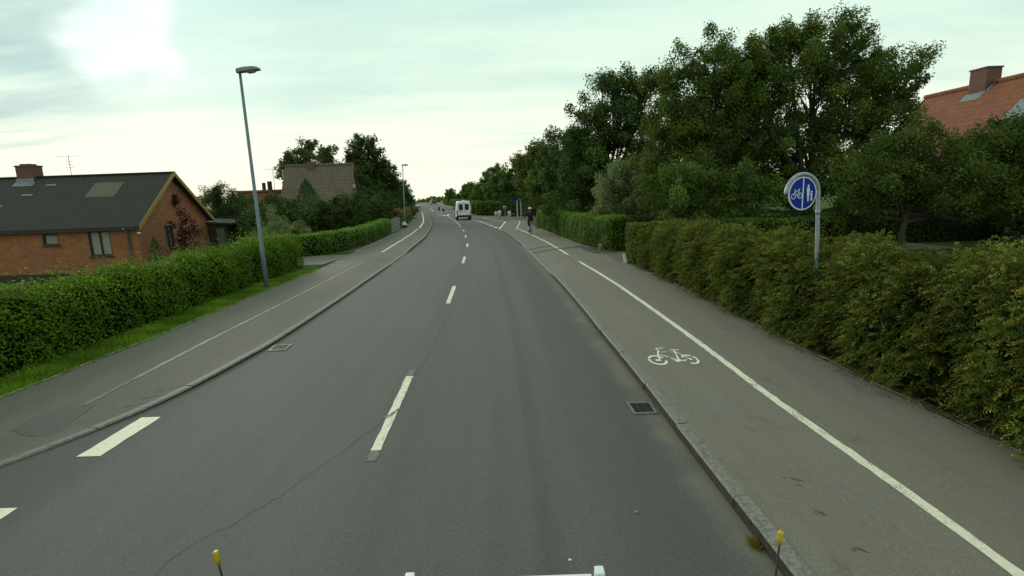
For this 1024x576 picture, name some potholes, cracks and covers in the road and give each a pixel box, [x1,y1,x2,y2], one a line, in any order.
drain grate [626,401,658,415]
crack [153,321,446,576]
